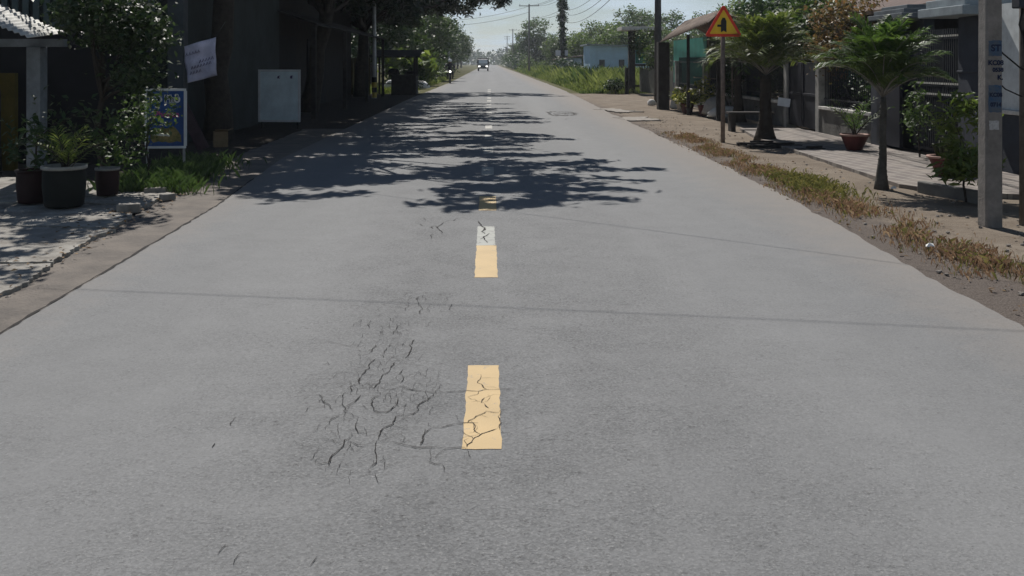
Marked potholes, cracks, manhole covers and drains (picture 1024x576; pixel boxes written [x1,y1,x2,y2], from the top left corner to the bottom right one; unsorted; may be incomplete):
crack [294,292,511,488]
